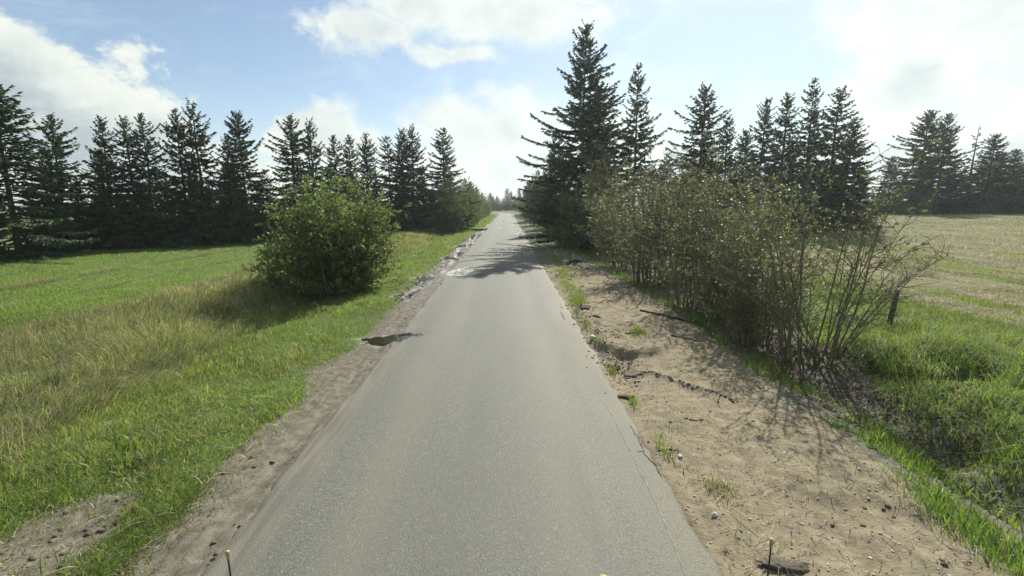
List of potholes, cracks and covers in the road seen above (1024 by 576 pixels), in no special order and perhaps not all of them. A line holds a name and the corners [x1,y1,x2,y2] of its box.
pothole [355,332,429,347]
crack [606,404,687,576]
